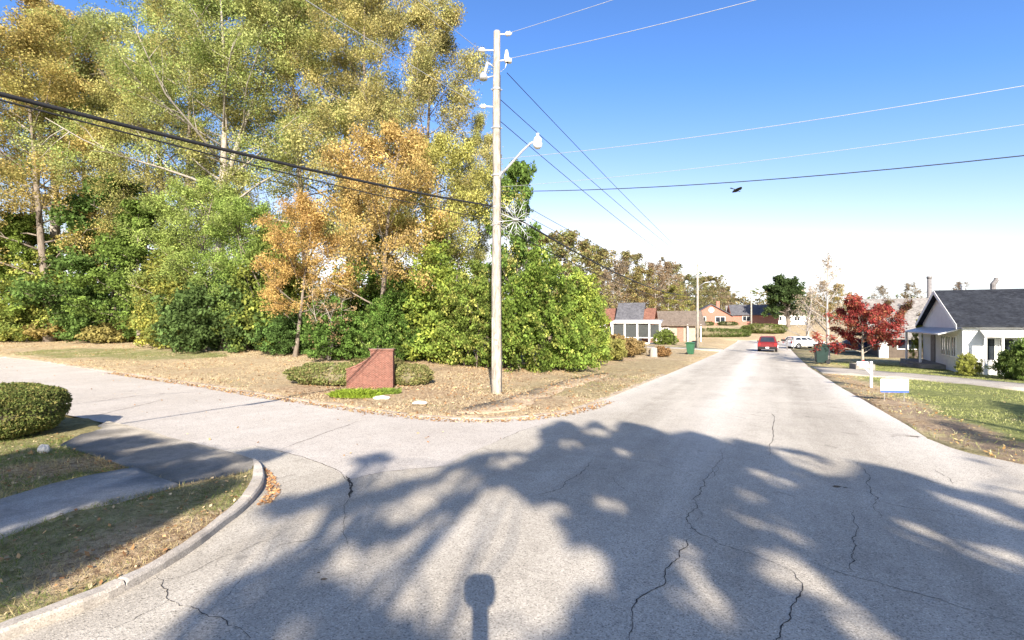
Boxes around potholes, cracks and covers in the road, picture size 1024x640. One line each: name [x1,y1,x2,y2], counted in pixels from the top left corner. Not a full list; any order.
crack [112,419,368,637]
crack [611,448,1015,640]
